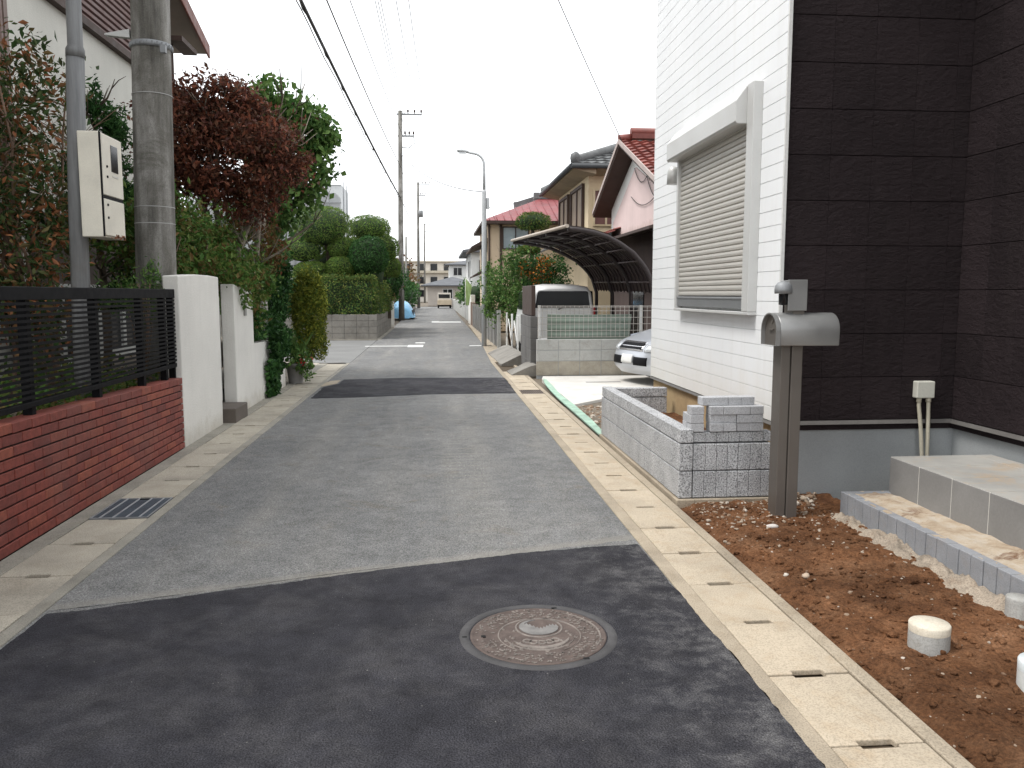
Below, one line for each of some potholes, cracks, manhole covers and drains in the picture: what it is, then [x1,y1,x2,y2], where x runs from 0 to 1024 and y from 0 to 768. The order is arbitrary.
drain grate [89,497,173,520]
manhole cover [459,605,617,671]
